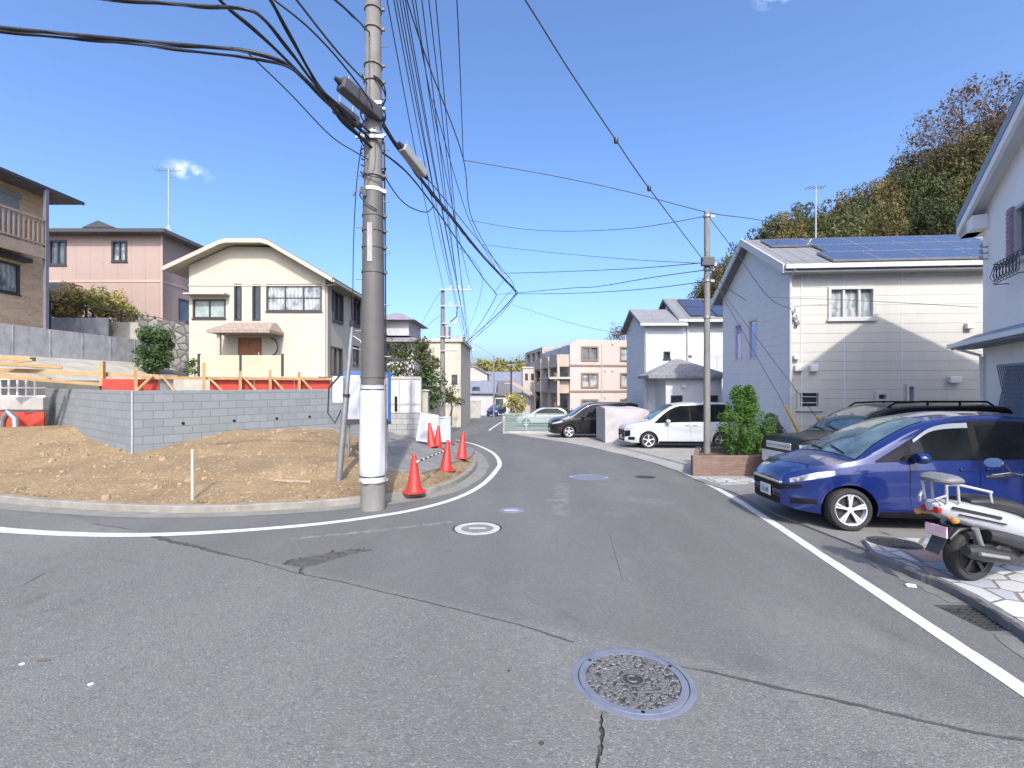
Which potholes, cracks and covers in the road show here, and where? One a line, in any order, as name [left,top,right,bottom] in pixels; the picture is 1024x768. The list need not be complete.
manhole cover [865,536,923,550]
manhole cover [452,522,502,535]
drain grate [934,605,1010,631]
manhole cover [572,647,697,720]
crack [596,711,605,768]
